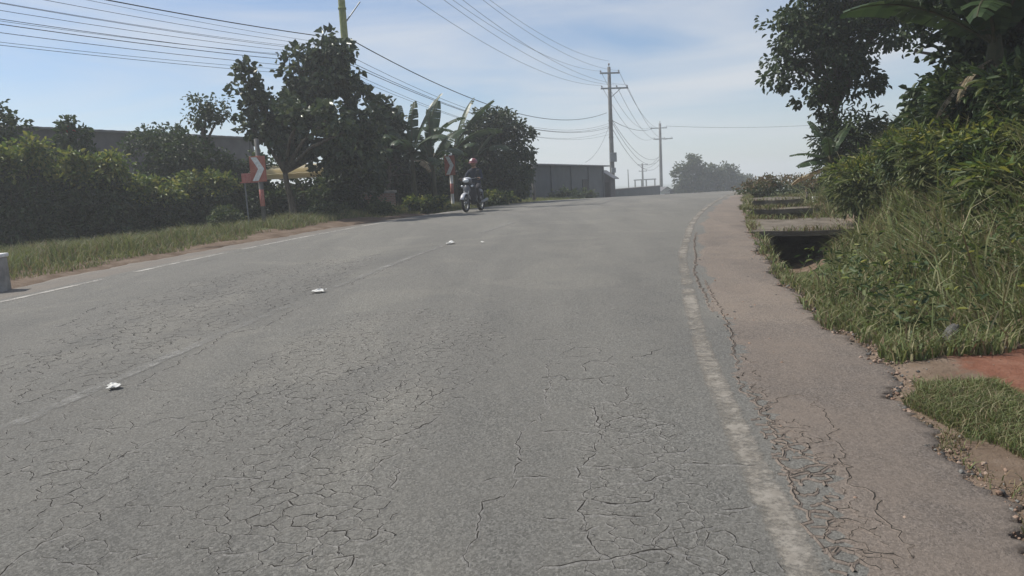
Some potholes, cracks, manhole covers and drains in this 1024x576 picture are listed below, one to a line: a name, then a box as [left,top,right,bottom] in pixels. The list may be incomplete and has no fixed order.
crack [0,232,915,576]
